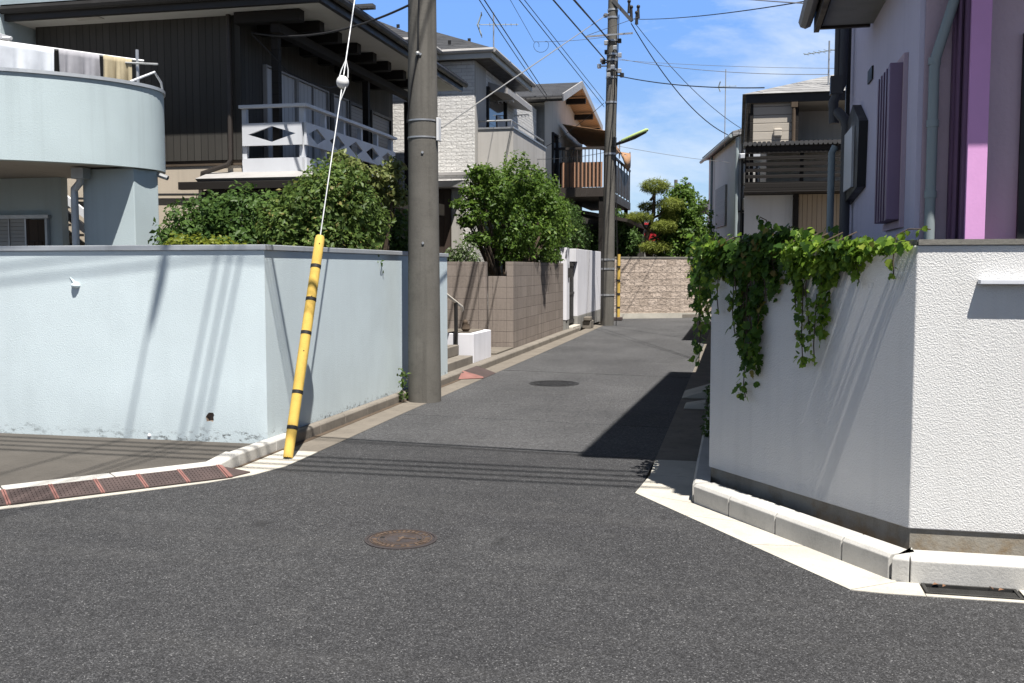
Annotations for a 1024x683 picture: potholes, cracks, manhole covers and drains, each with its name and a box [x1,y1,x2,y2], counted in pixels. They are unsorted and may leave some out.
manhole cover [364,529,437,550]
drain grate [921,583,1024,600]
